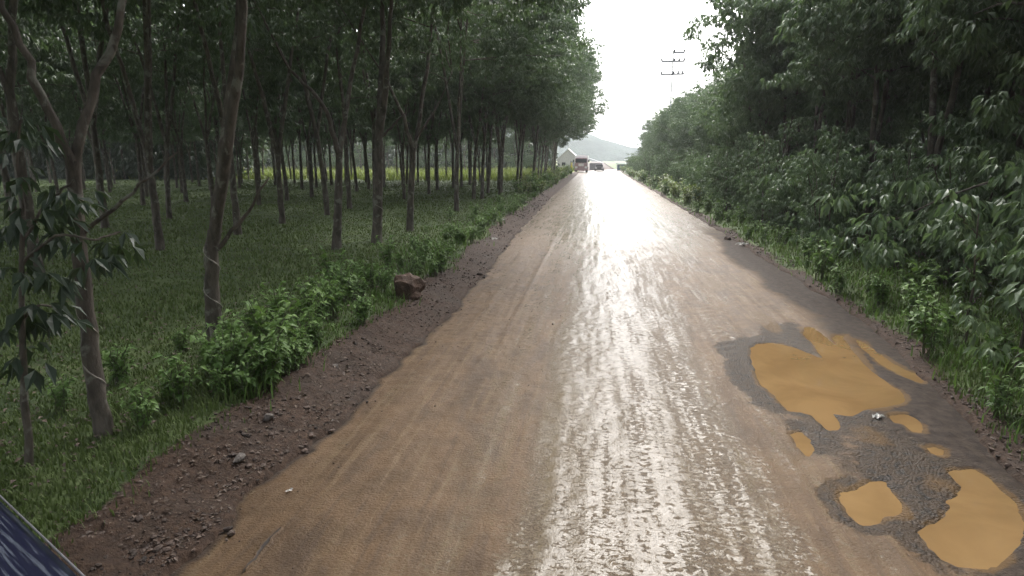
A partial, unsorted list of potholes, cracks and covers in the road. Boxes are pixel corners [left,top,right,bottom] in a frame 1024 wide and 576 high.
pothole [893,457,1024,576]
pothole [803,465,928,543]
pothole [777,425,830,462]
pothole [732,321,932,439]
